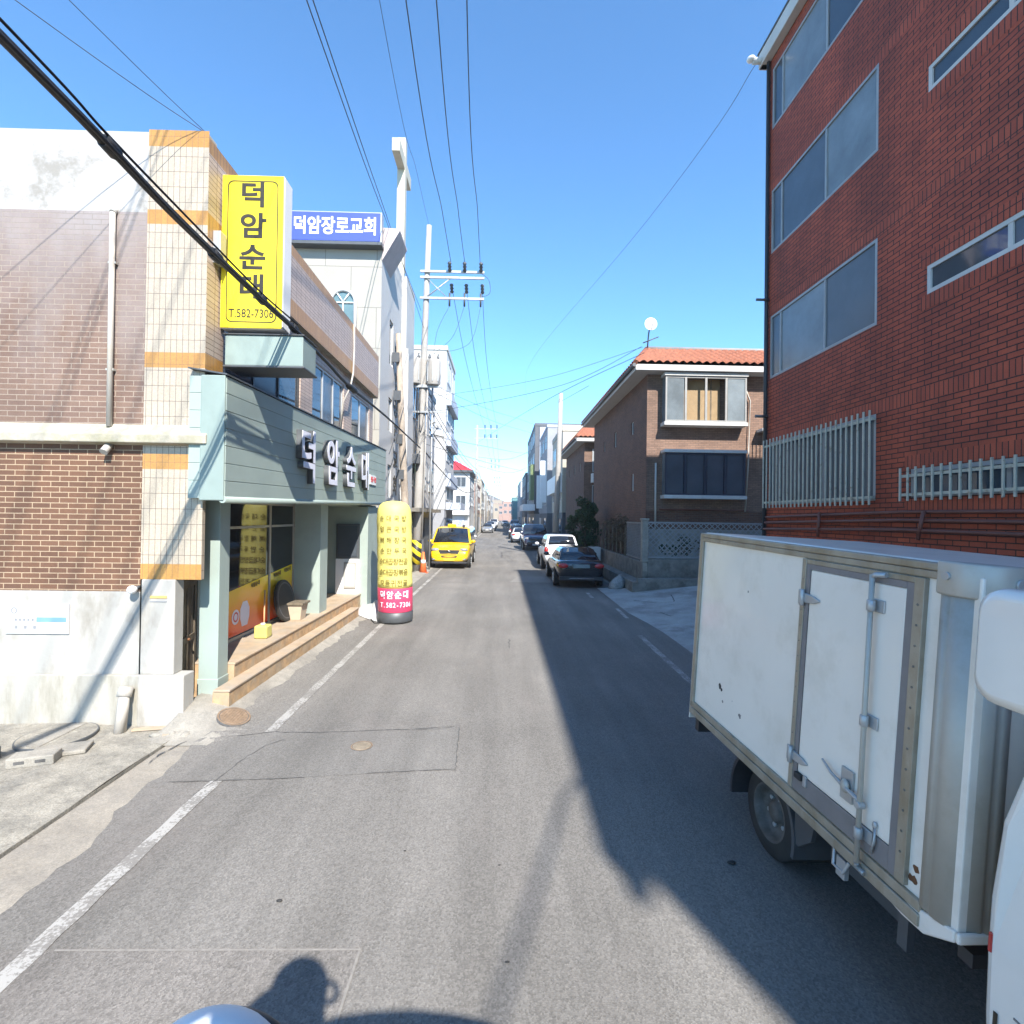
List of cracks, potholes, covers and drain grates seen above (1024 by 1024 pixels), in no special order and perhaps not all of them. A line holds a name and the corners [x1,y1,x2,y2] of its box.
manhole cover [216,707,251,727]
manhole cover [351,741,373,751]
crack [193,739,284,795]
